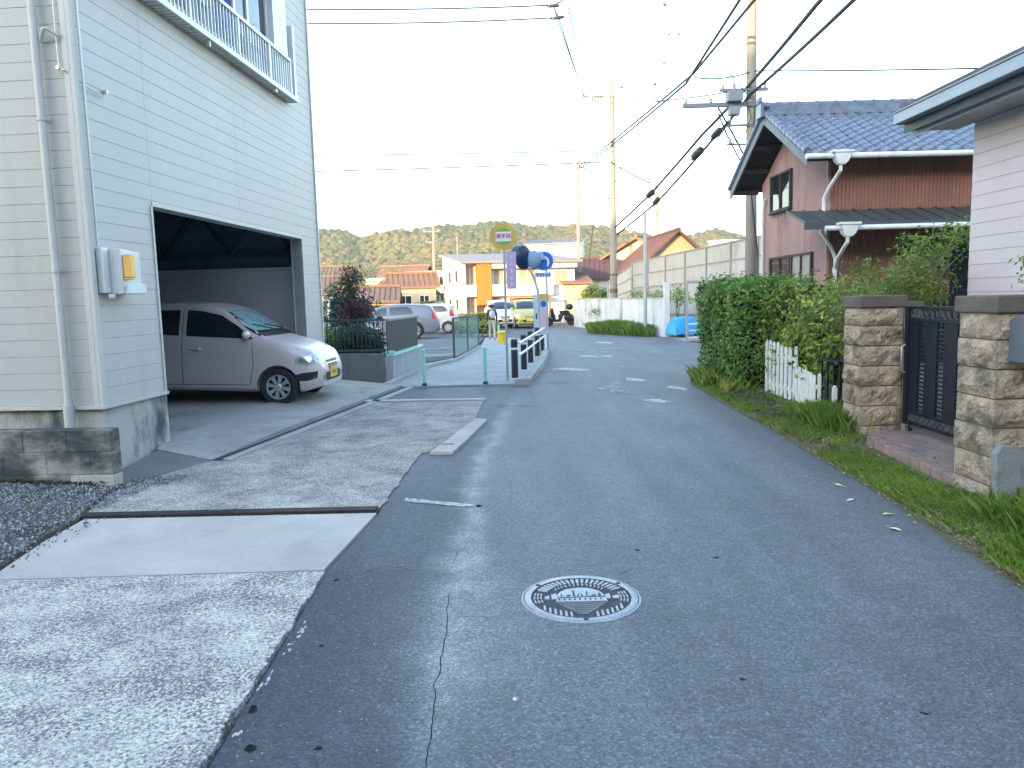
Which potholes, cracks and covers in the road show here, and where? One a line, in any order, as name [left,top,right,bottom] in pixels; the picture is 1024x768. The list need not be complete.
manhole cover [521,575,641,624]
crack [425,589,505,768]
